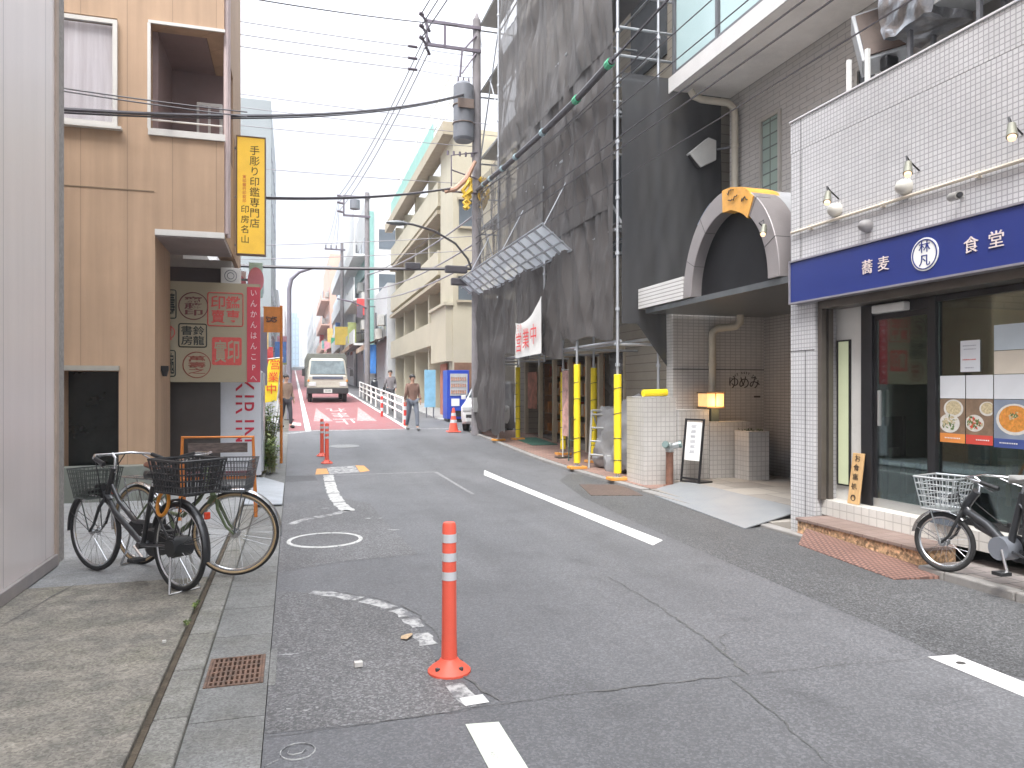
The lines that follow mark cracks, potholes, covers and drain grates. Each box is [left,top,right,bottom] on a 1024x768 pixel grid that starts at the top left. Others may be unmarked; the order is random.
utility cover [579,484,643,496]
crack [606,576,831,765]
drain grate [203,654,266,689]
